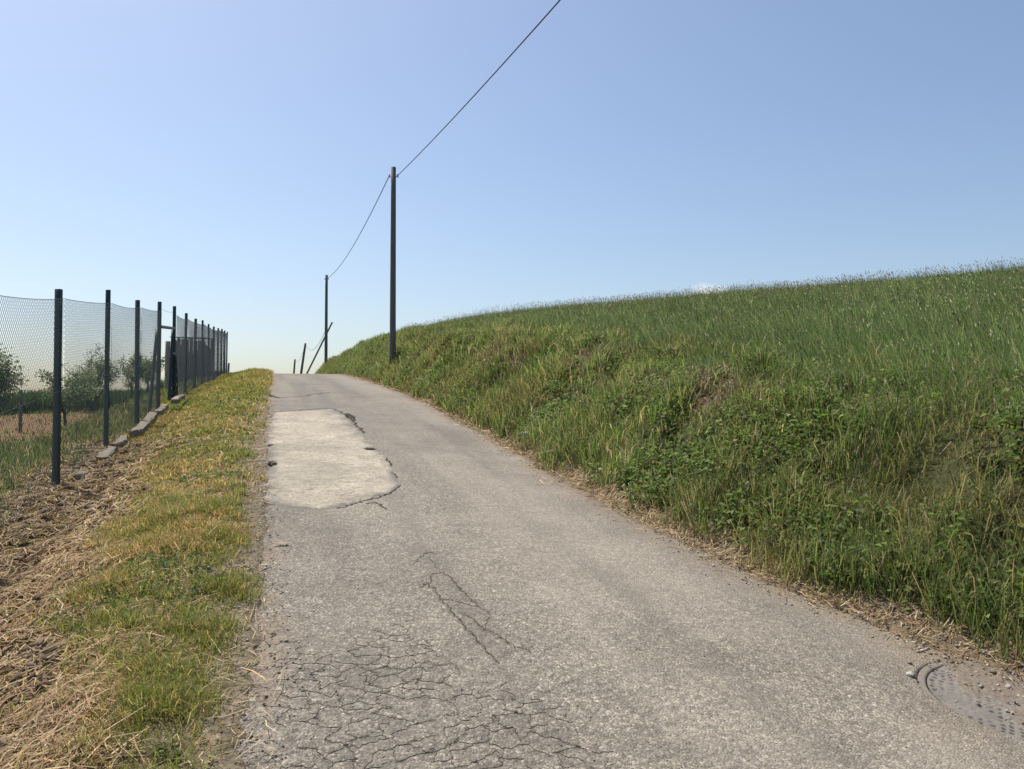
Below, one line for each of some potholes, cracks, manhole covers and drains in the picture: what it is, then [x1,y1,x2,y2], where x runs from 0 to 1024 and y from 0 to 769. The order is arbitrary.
crack [264,623,614,769]
crack [413,552,531,663]
crack [269,392,365,433]
manhole cover [917,660,1024,740]
